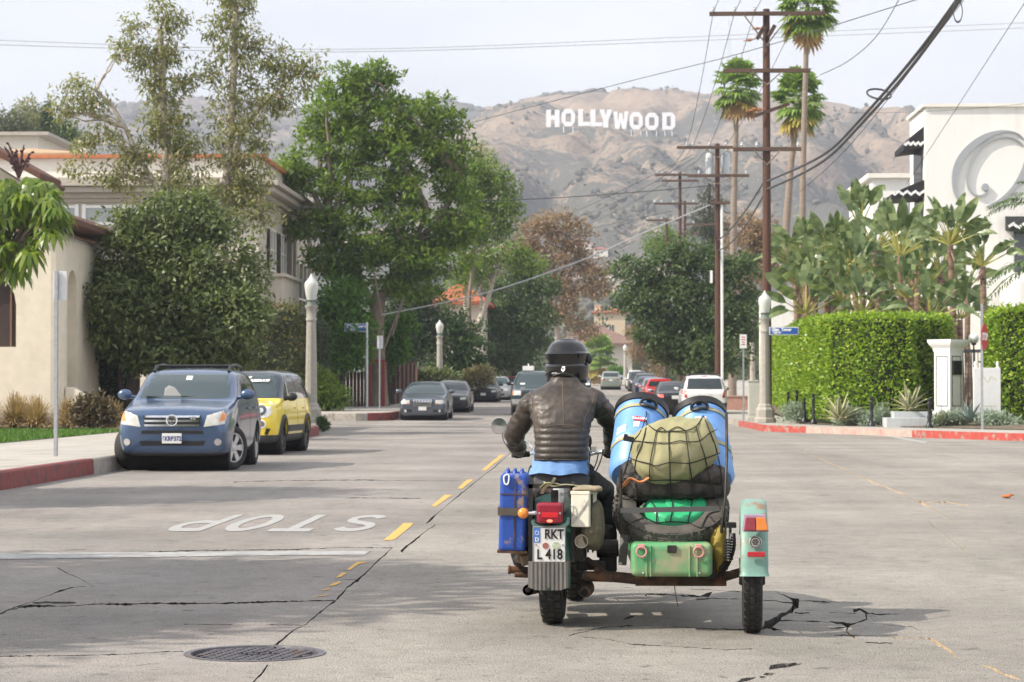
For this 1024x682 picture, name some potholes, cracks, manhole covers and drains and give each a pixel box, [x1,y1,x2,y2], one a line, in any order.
manhole cover [184,645,326,662]
crack [569,589,1024,681]
crack [0,452,511,682]
